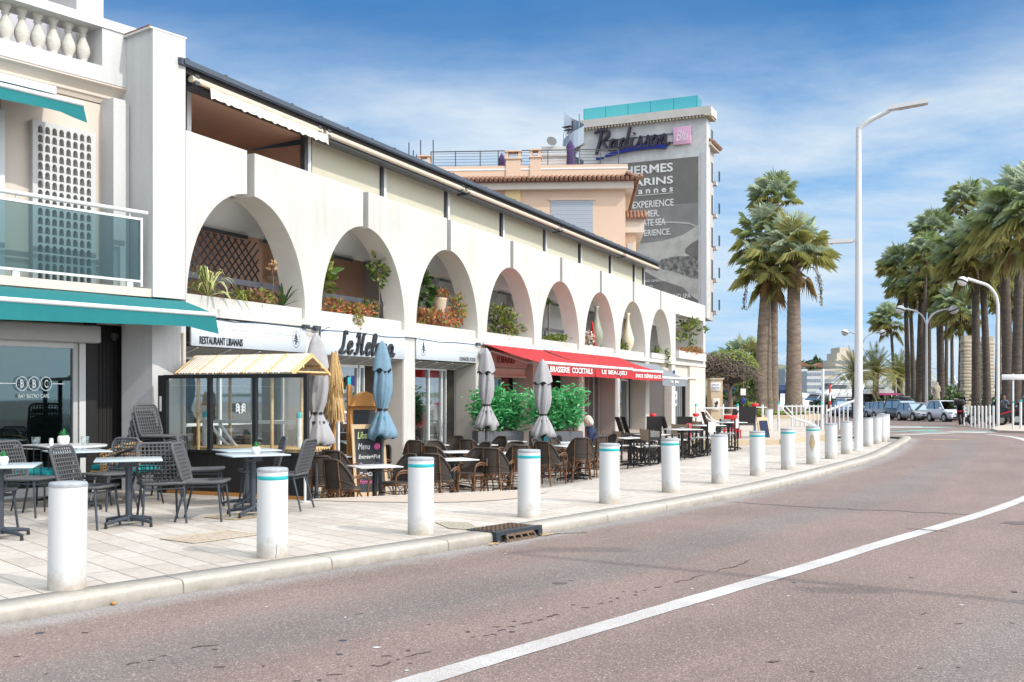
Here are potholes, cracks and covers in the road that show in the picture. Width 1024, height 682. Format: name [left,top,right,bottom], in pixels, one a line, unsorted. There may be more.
drain grate [467,522,543,544]
crack [472,591,639,637]
